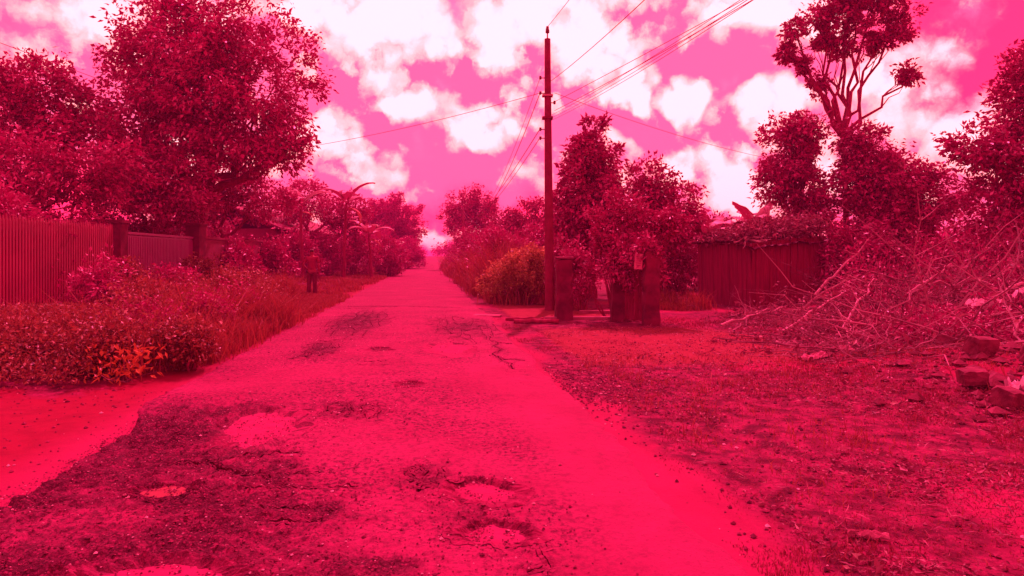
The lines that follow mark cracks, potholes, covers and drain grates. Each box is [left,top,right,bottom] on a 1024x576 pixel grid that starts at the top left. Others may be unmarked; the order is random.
pothole [118,479,205,503]
pothole [203,405,316,465]
pothole [442,515,552,550]
pothole [438,475,536,509]
crack [292,306,525,369]
